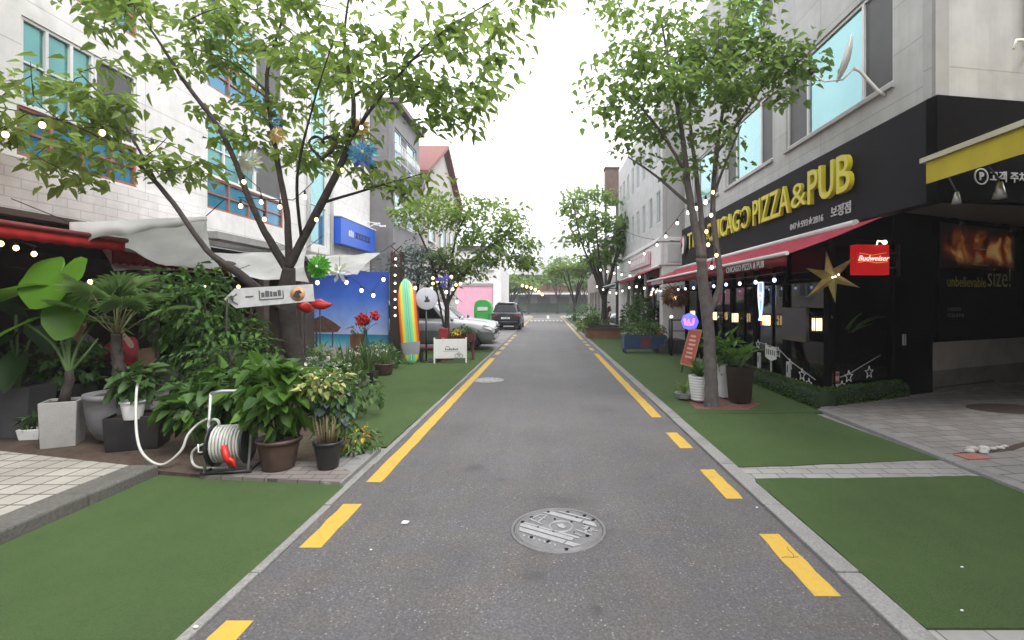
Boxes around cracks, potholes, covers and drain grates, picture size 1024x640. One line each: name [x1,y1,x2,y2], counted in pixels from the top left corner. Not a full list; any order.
manhole cover [510,508,607,554]
manhole cover [966,403,1024,414]
